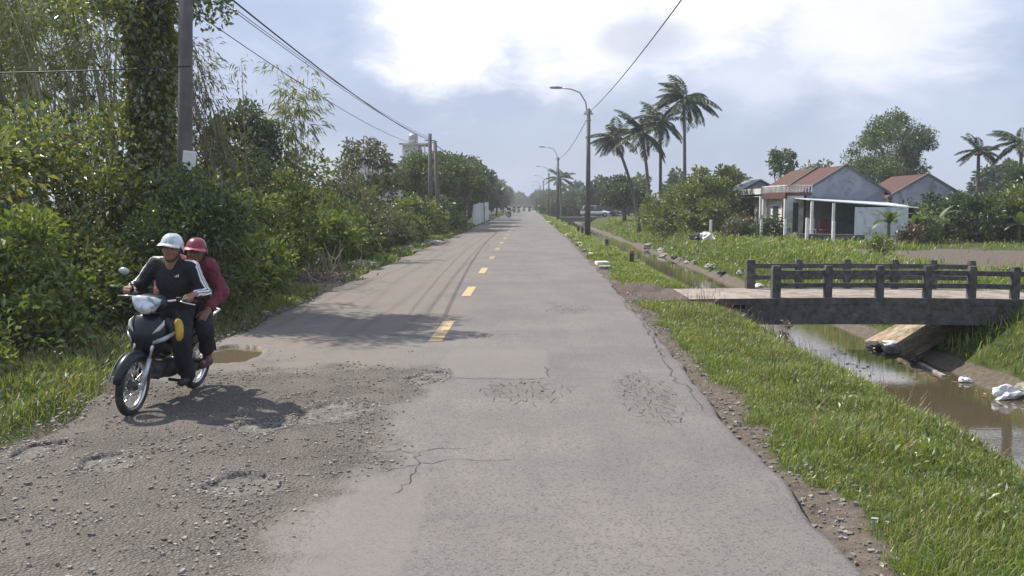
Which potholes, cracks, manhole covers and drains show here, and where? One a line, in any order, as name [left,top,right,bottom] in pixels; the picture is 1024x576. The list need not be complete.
crack [443,367,571,406]
pothole [0,435,84,469]
pothole [184,467,301,501]
crack [360,448,505,494]
pothole [170,342,275,366]
pothole [281,397,389,428]
crack [617,297,702,425]
pothole [64,448,154,476]
